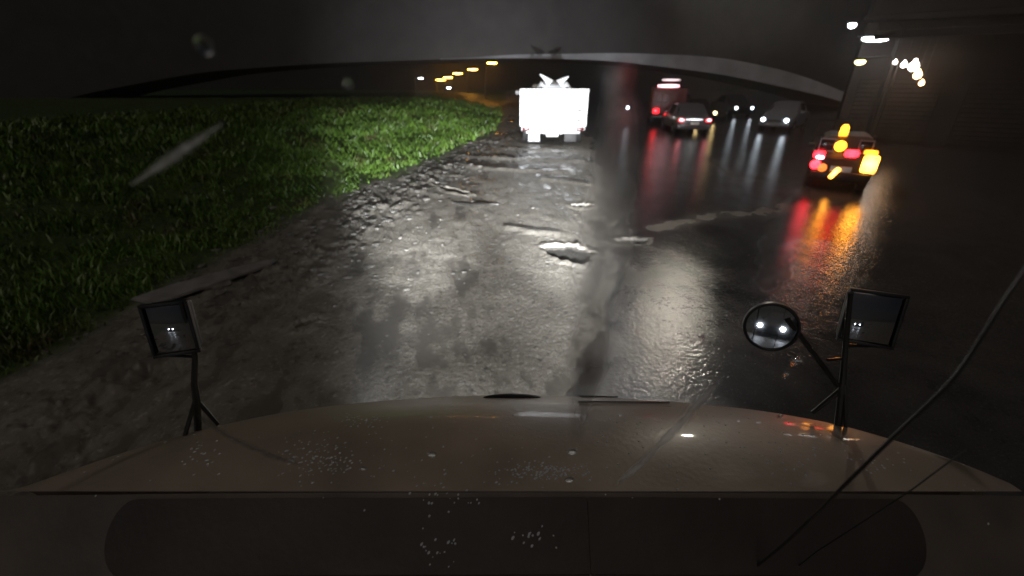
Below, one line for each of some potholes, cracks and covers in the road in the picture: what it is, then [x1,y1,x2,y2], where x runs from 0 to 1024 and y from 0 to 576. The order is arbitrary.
pothole [532,241,588,269]
pothole [564,202,594,211]
pothole [623,236,654,246]
